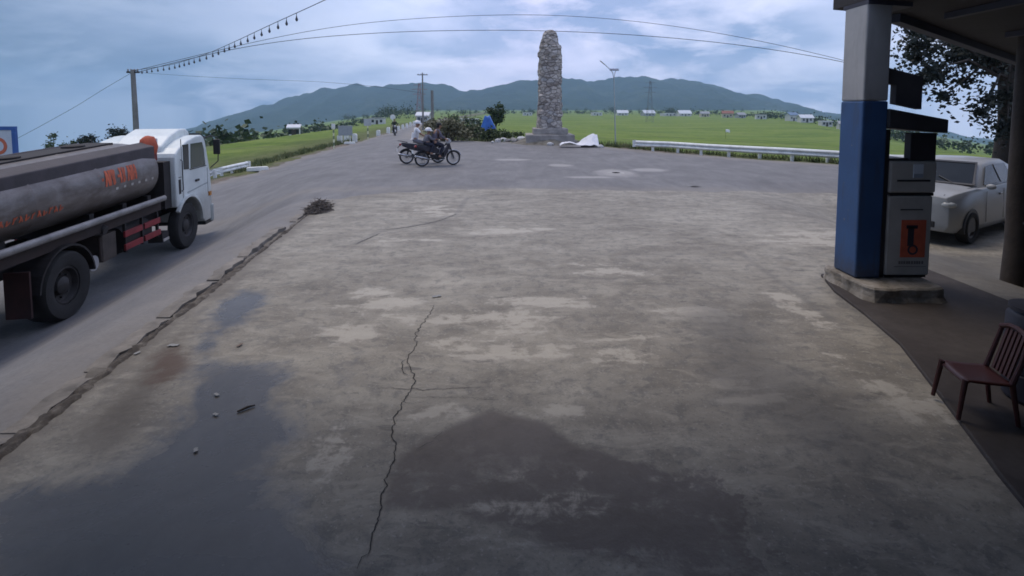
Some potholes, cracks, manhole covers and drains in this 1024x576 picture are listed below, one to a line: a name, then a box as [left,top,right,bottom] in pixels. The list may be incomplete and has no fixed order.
crack [357,305,493,568]
